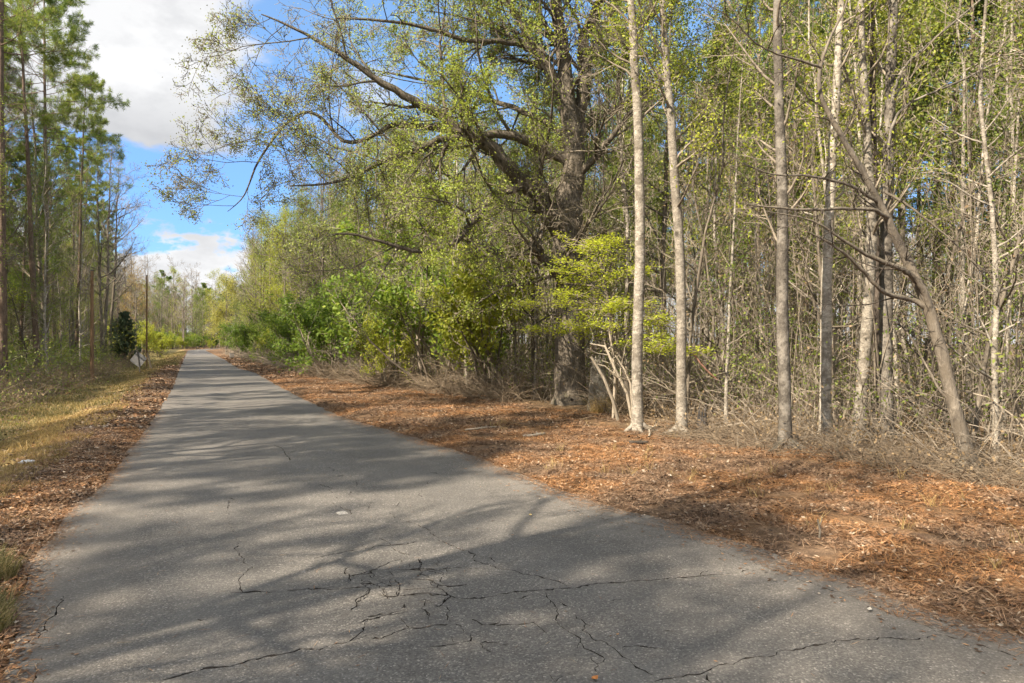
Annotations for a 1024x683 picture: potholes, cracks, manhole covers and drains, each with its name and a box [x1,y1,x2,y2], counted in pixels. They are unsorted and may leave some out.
crack [397,505,1016,682]
crack [28,596,64,683]
crack [165,499,545,680]
